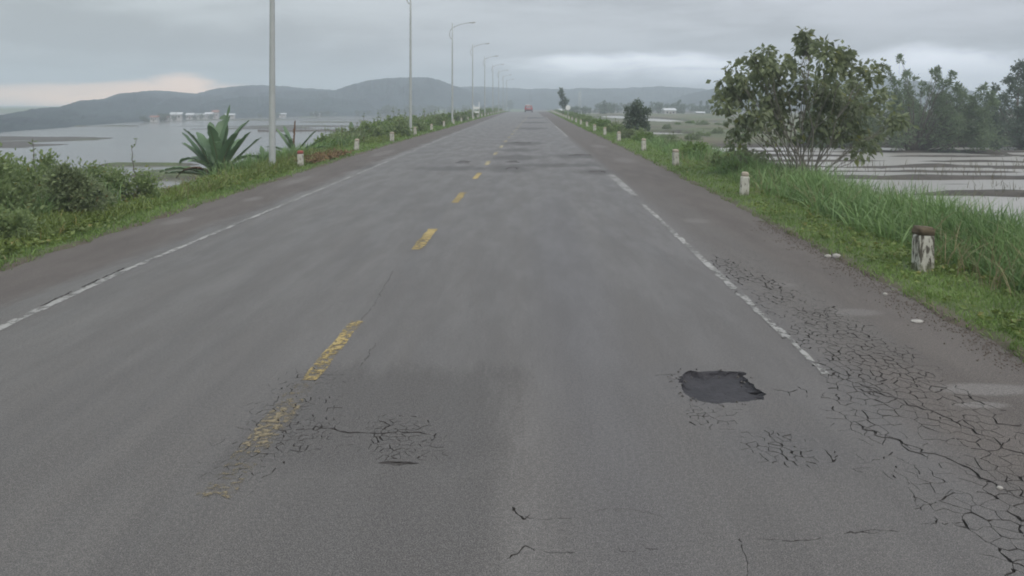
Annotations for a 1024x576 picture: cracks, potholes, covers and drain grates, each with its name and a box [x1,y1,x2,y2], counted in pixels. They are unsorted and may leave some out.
pothole [667,368,766,407]
crack [512,507,569,520]
crack [199,348,450,495]
crack [686,402,740,430]
crack [507,545,575,559]
crack [705,257,1024,576]
